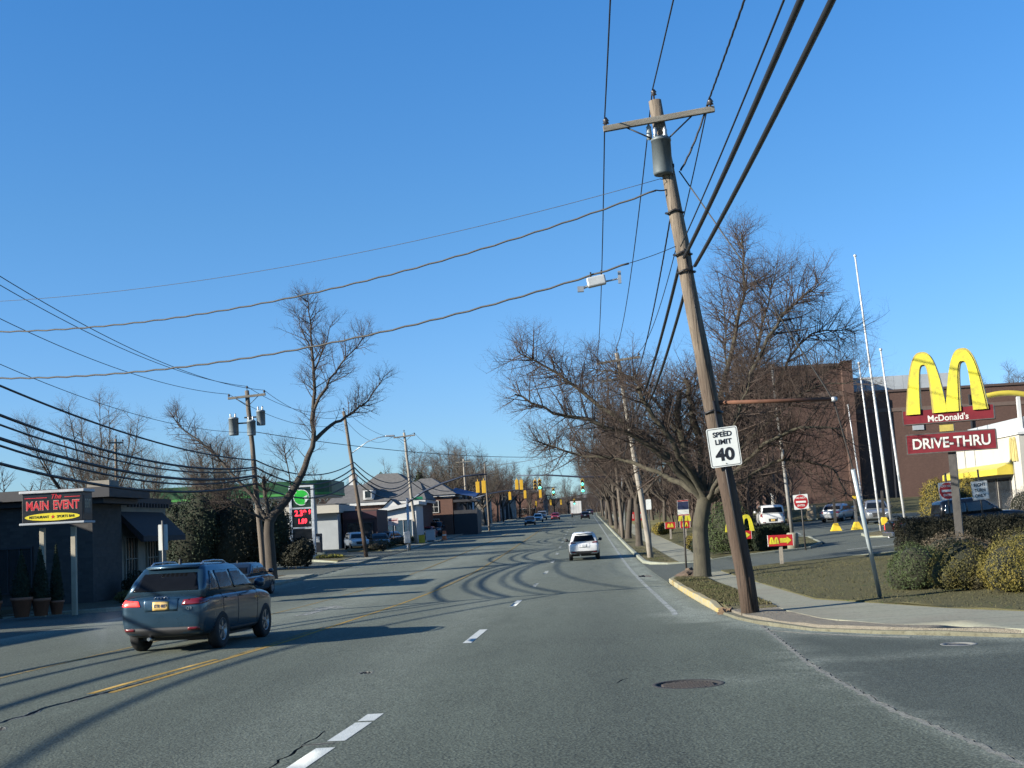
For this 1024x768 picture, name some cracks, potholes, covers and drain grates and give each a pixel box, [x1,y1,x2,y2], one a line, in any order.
crack [0,673,174,723]
manhole cover [652,679,725,689]
crack [269,731,339,768]
